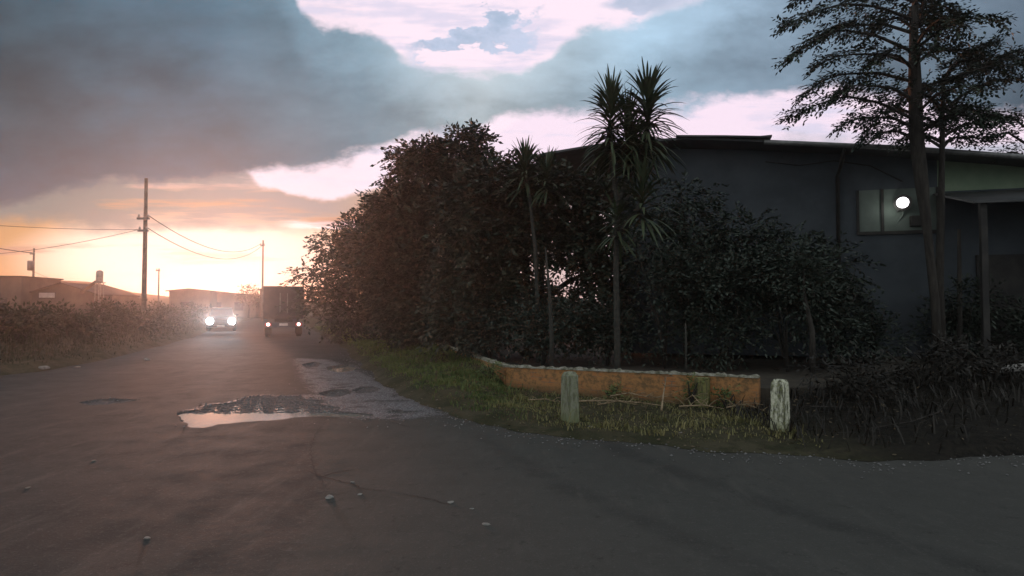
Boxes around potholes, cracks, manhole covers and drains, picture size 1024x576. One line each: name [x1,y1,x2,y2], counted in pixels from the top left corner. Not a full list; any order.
crack [307,423,384,491]
pothole [319,388,354,397]
pothole [79,397,140,405]
pothole [176,393,373,428]
